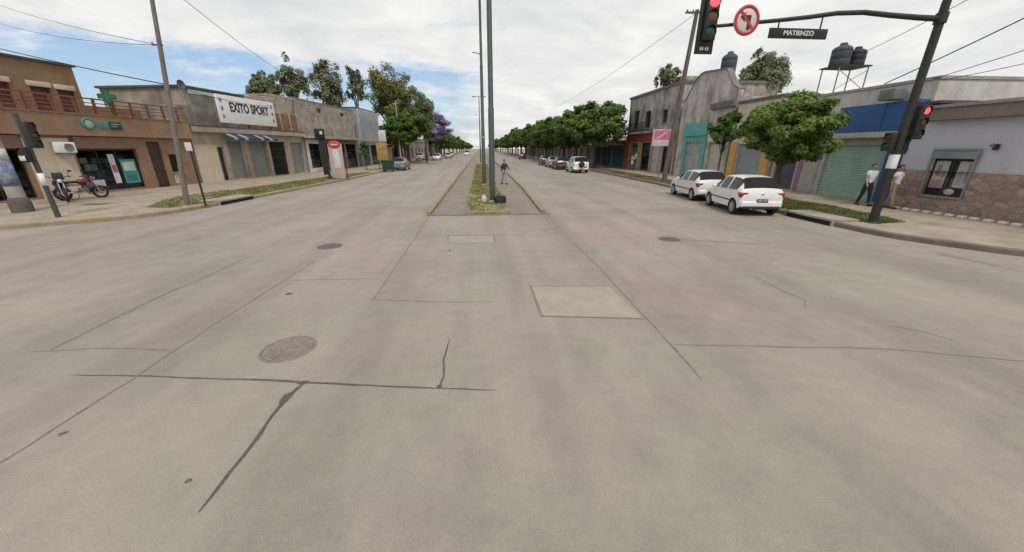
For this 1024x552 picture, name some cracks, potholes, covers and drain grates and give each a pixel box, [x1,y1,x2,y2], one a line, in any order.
manhole cover [258,336,317,363]
crack [549,217,1022,379]
crack [0,216,484,463]
